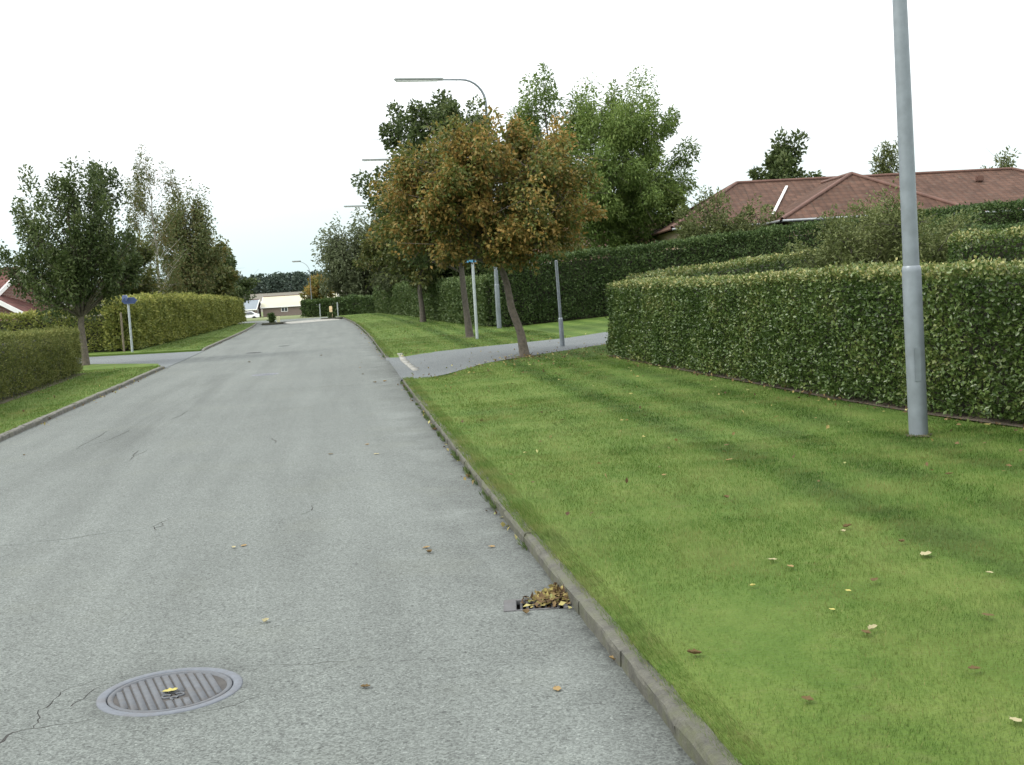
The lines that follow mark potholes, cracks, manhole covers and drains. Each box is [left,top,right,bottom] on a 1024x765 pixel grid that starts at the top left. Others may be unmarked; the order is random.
crack [0,681,106,743]
drain grate [504,599,568,612]
manhole cover [96,667,243,717]
